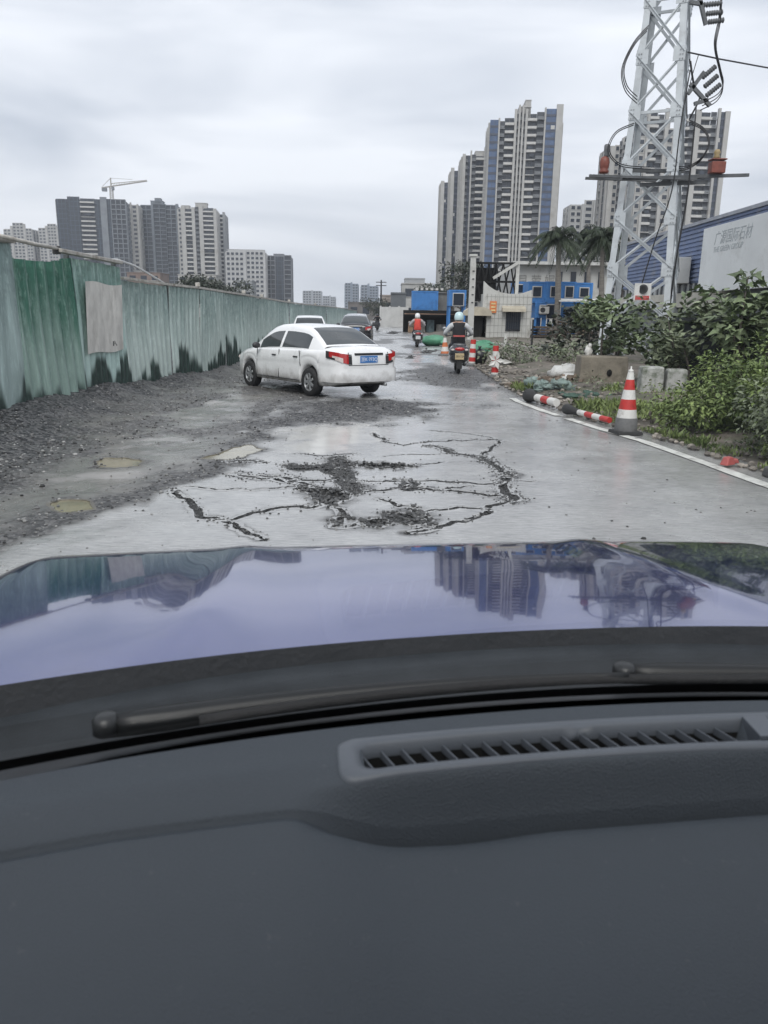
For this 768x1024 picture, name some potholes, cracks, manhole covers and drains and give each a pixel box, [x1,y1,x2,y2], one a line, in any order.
pothole [199,444,264,461]
pothole [326,512,356,528]
pothole [328,456,357,469]
pothole [46,498,97,514]
pothole [381,510,428,526]
pothole [92,457,145,468]
pothole [356,517,394,529]
pothole [405,504,439,526]
crack [159,424,538,541]
pothole [341,480,365,495]
